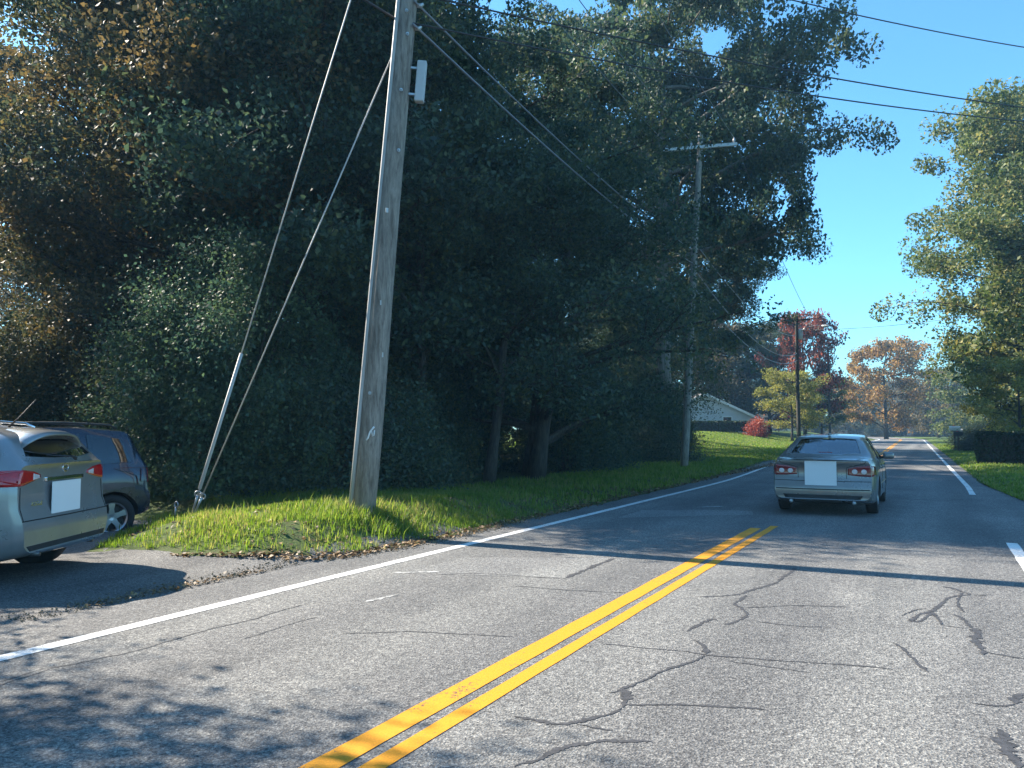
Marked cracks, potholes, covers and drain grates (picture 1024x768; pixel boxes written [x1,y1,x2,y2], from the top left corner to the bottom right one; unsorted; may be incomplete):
crack [975,693,1024,706]
crack [687,595,842,631]
crack [893,642,929,672]
